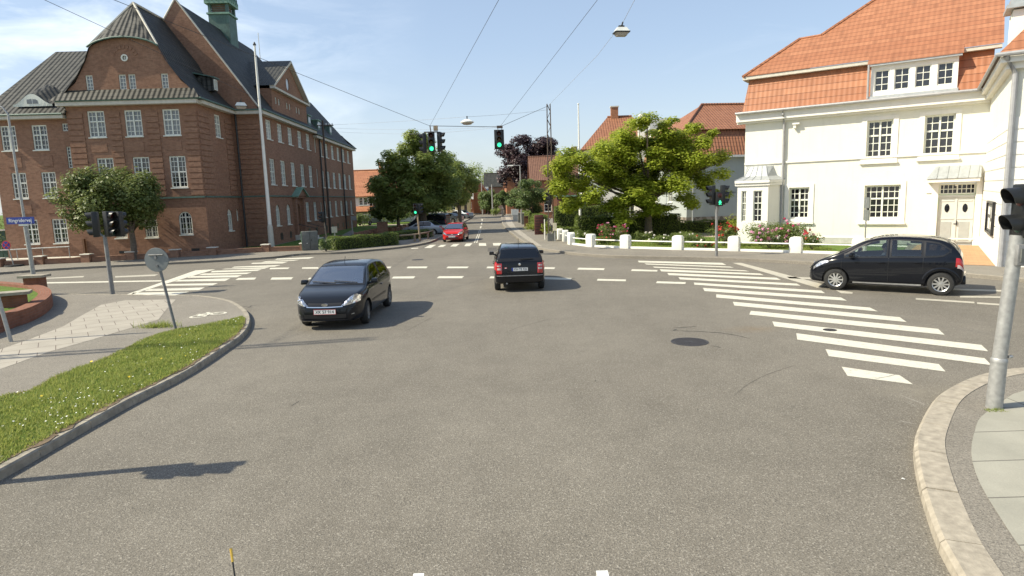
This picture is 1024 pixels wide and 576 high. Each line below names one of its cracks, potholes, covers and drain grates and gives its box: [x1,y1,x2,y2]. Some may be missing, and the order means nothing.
manhole cover [671,337,709,346]
